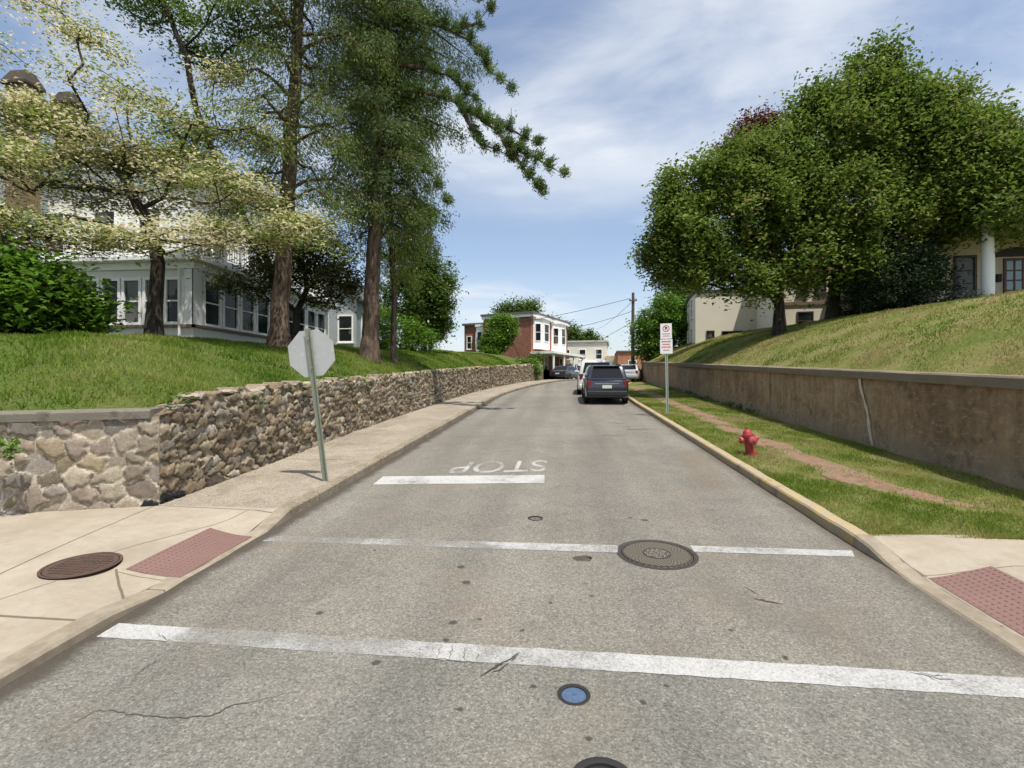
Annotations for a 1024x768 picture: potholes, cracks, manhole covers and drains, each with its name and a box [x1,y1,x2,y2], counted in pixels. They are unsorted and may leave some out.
utility cover [557,684,591,705]
manhole cover [37,552,123,580]
utility cover [573,757,628,768]
manhole cover [617,540,699,570]
crack [431,646,520,676]
crack [61,692,289,730]
